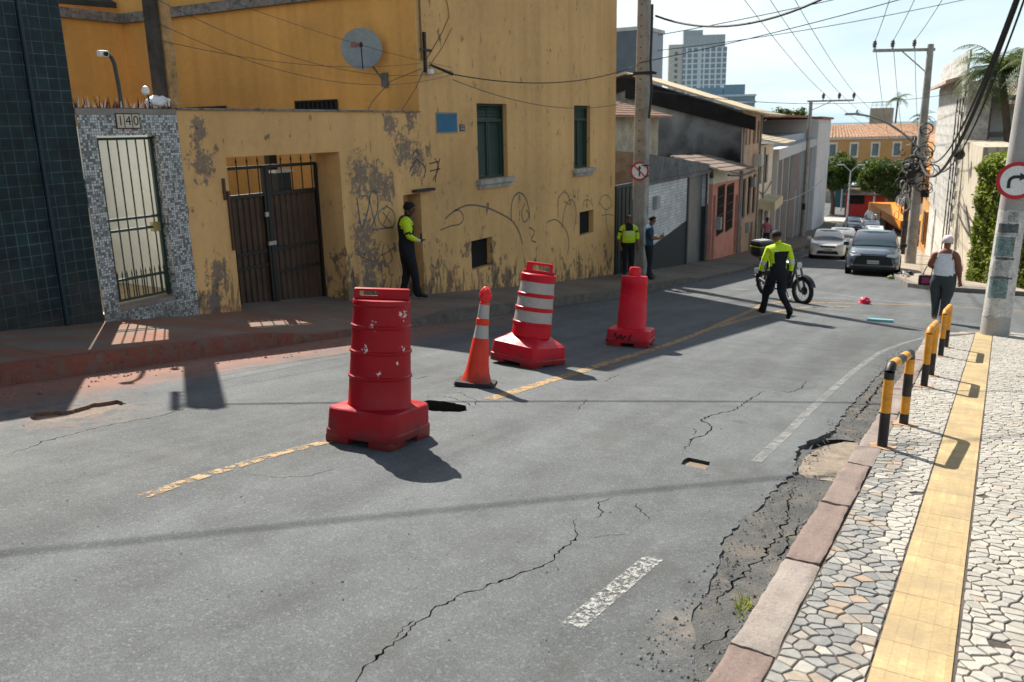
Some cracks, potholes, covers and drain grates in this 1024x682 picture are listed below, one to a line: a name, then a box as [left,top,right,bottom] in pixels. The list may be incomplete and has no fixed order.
crack [683,389,766,452]
pothole [811,439,856,449]
pothole [681,458,710,469]
pothole [424,400,467,412]
crack [355,497,629,682]
